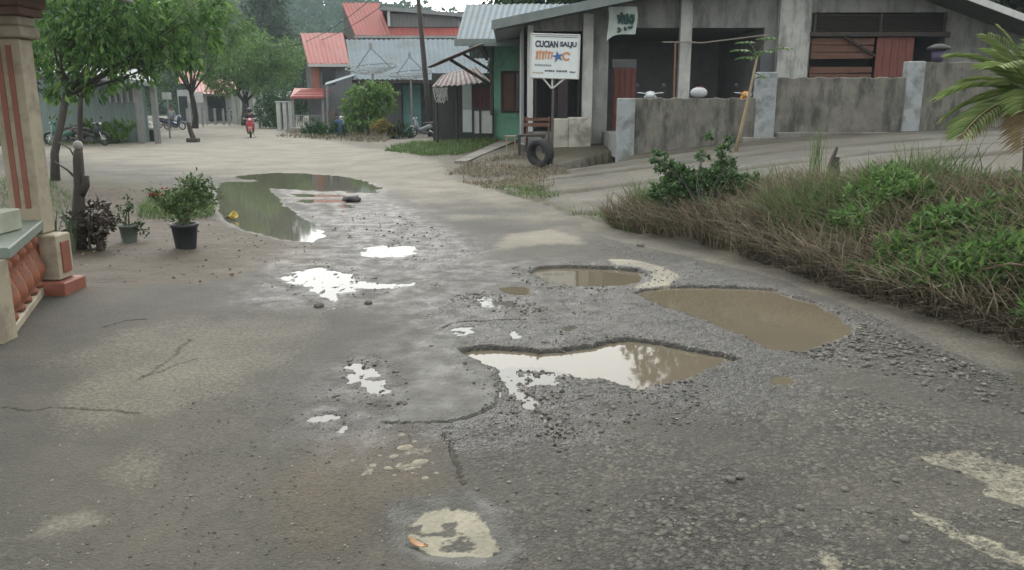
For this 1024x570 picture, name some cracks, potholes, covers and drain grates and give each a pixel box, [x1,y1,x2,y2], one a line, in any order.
crack [0,406,142,414]
crack [100,319,201,383]
pothole [449,336,748,394]
pothole [629,284,865,352]
pothole [494,285,539,296]
pothole [522,264,656,288]
pothole [236,173,388,216]
